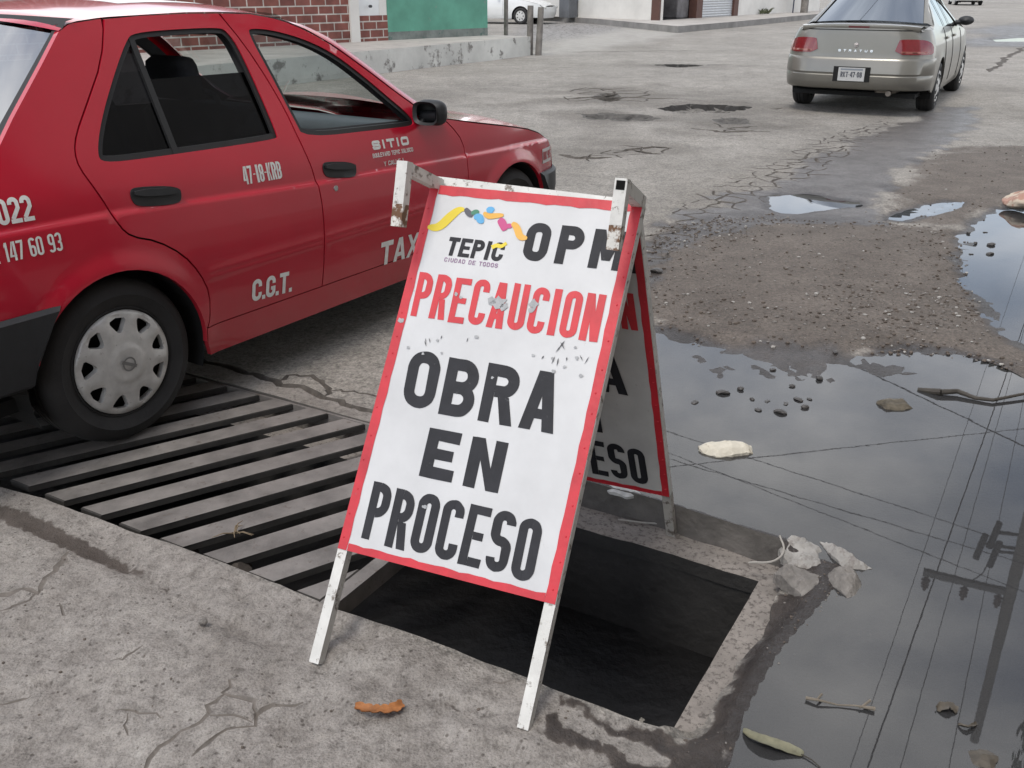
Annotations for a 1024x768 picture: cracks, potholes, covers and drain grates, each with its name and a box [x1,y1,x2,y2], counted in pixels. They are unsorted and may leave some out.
pothole [575,112,661,122]
crack [111,645,143,661]
pothole [657,103,753,114]
crack [0,551,70,616]
crack [645,121,904,269]
crack [559,145,672,161]
crack [113,679,303,768]
crack [986,47,1024,72]
crack [203,359,377,413]
crack [0,695,32,706]
drain grate [0,374,404,613]
crack [564,87,679,103]
